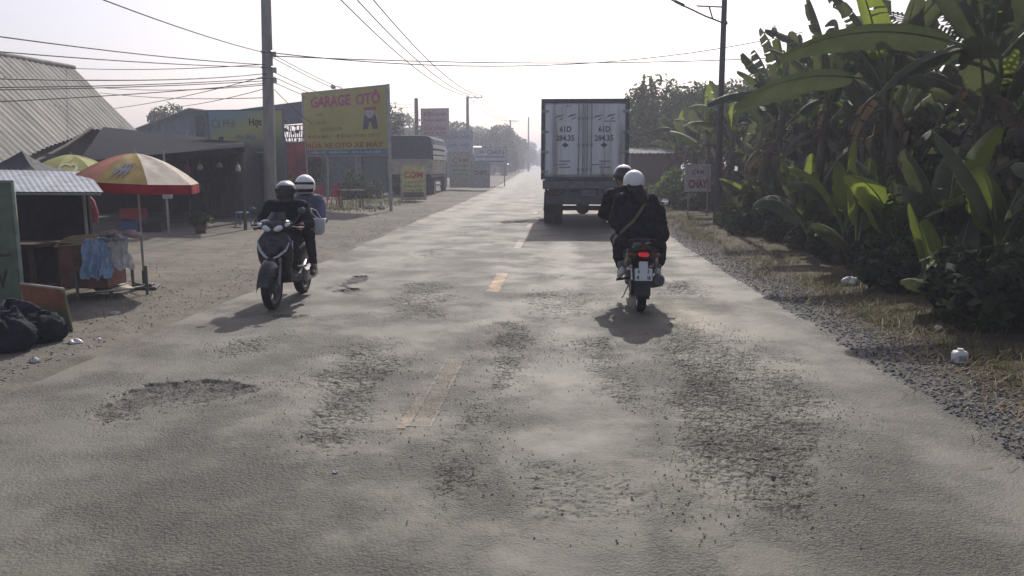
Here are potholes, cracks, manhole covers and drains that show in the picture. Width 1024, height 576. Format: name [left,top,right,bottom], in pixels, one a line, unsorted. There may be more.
pothole [321,271,379,295]
pothole [77,378,280,426]
